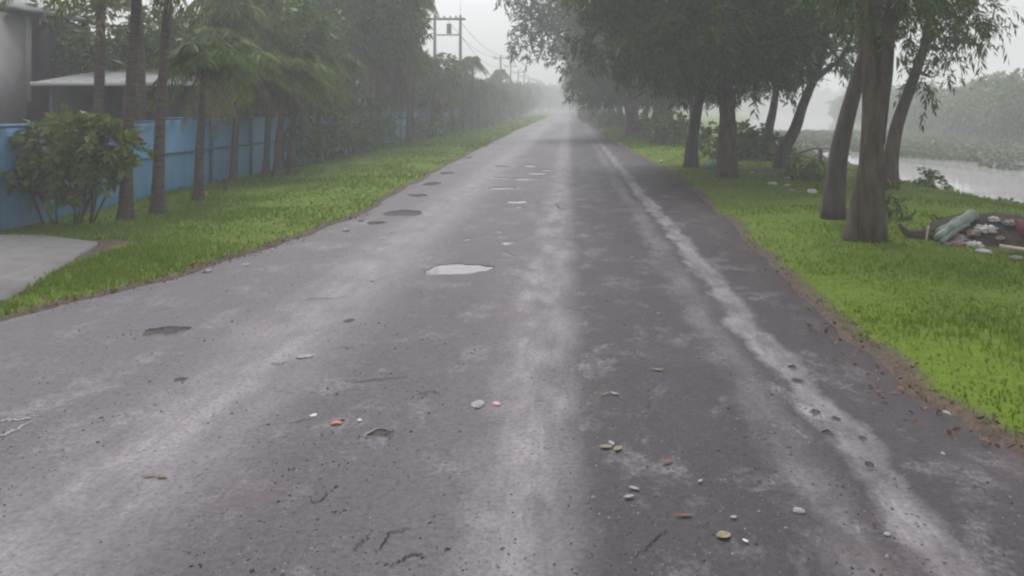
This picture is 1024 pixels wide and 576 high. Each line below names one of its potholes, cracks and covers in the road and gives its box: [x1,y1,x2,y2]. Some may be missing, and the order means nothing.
pothole [424,263,495,275]
crack [354,527,422,567]
pothole [143,325,195,336]
pothole [363,427,395,438]
